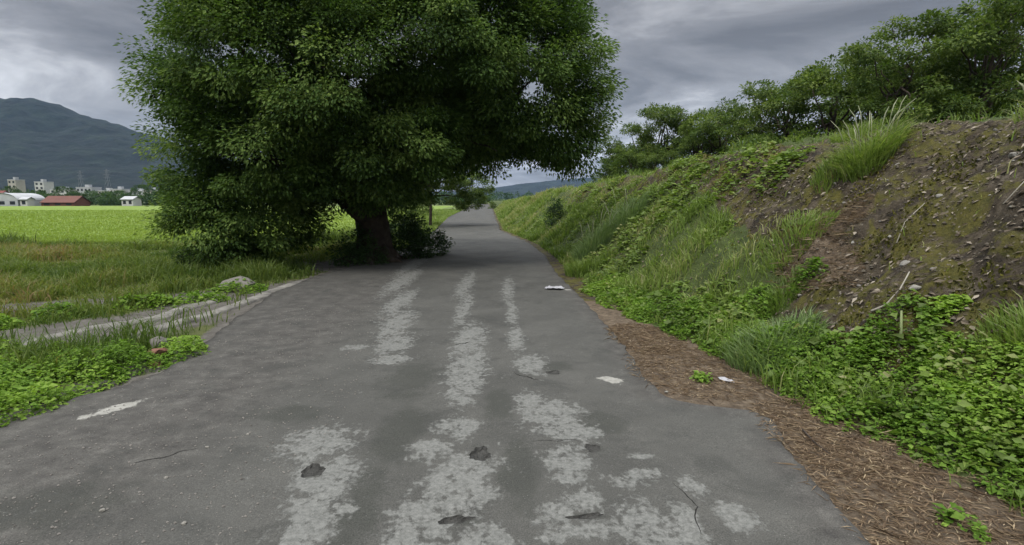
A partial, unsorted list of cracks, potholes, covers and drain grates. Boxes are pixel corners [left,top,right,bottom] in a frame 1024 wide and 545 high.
pothole [301,463,326,478]
pothole [438,515,476,524]
crack [673,483,701,532]
pothole [469,446,491,461]
